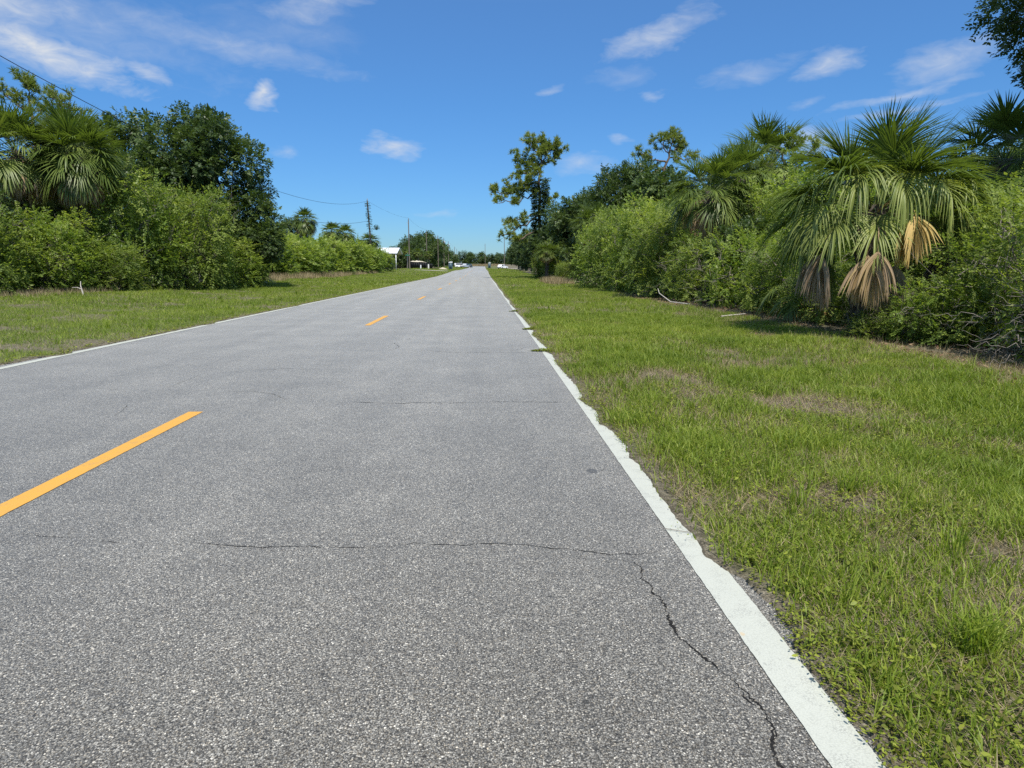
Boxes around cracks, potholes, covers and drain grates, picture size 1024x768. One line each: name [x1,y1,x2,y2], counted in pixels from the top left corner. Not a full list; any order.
crack [18,534,784,768]
